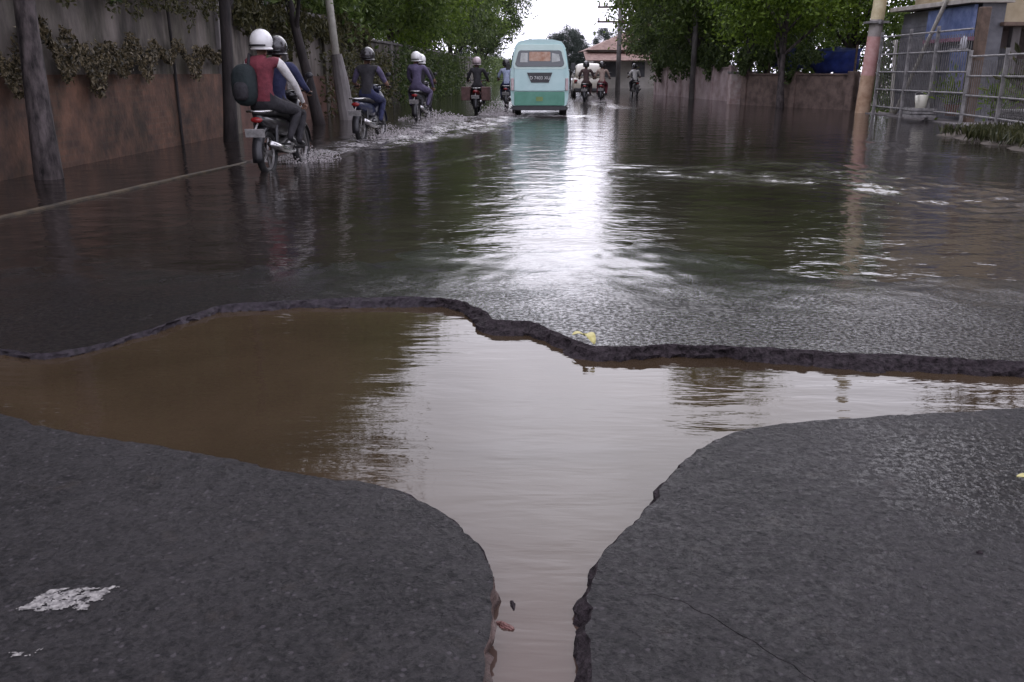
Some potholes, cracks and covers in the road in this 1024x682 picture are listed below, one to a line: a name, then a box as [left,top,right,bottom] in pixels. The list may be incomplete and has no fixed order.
pothole [0,296,1024,682]
crack [635,593,815,682]
